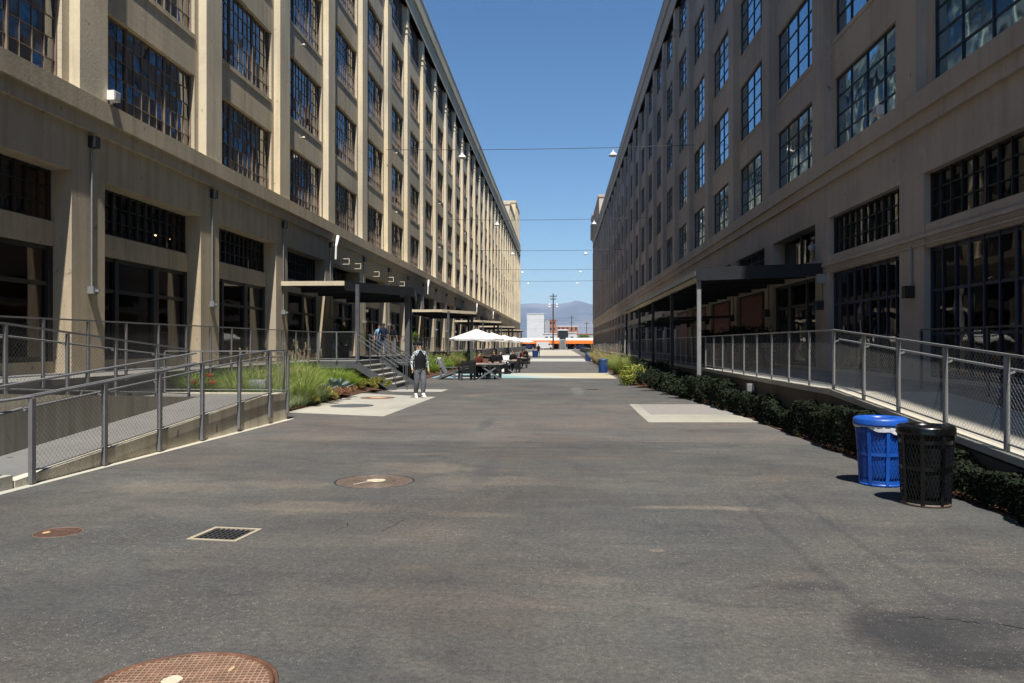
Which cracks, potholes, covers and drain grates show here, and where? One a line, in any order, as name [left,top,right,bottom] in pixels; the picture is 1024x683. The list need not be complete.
manhole cover [31,527,85,538]
crack [913,617,1024,629]
manhole cover [93,652,278,683]
manhole cover [334,474,415,488]
drain grate [186,526,262,542]
